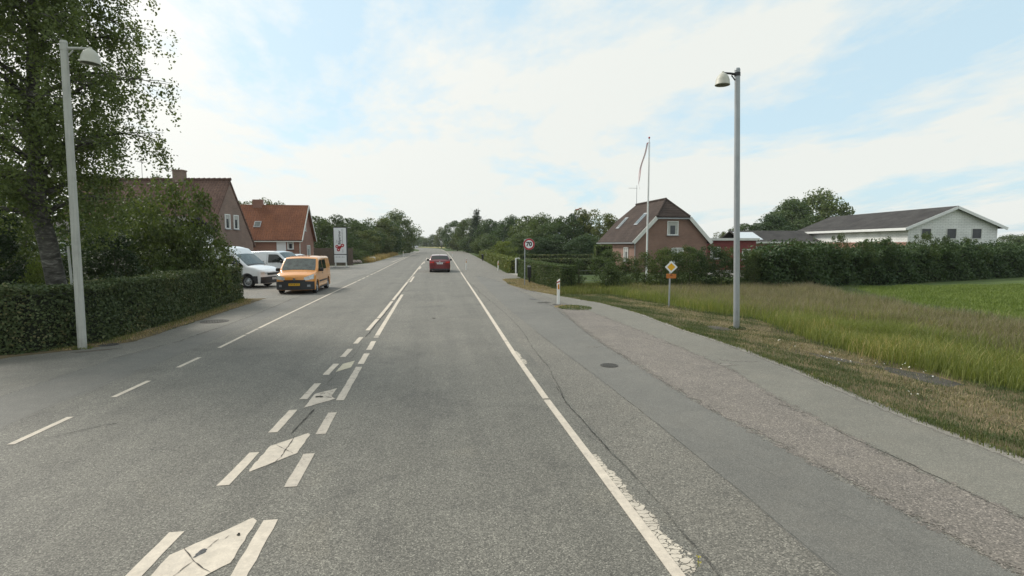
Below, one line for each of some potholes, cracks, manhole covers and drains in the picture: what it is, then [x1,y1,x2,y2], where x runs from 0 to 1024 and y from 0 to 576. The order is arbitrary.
crack [173,536,228,576]
crack [268,409,314,465]
